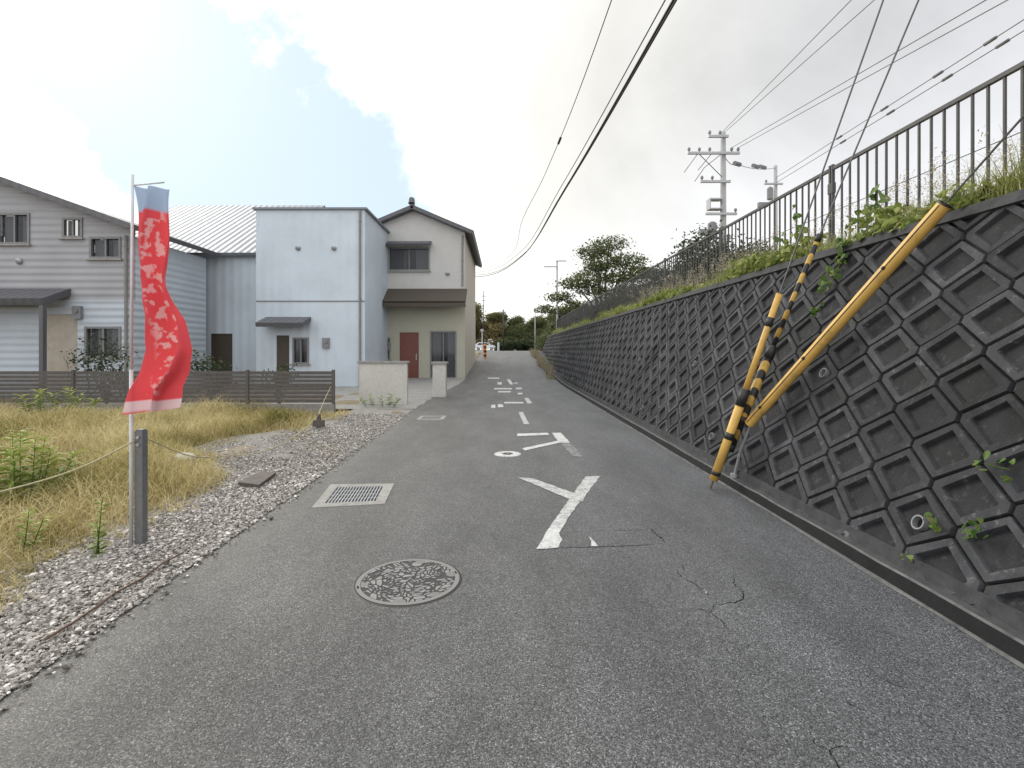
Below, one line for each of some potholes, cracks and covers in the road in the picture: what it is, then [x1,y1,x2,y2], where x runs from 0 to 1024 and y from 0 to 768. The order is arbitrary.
drain grate [312,483,394,508]
manhole cover [352,558,462,608]
crack [813,740,842,768]
crack [678,564,745,628]
